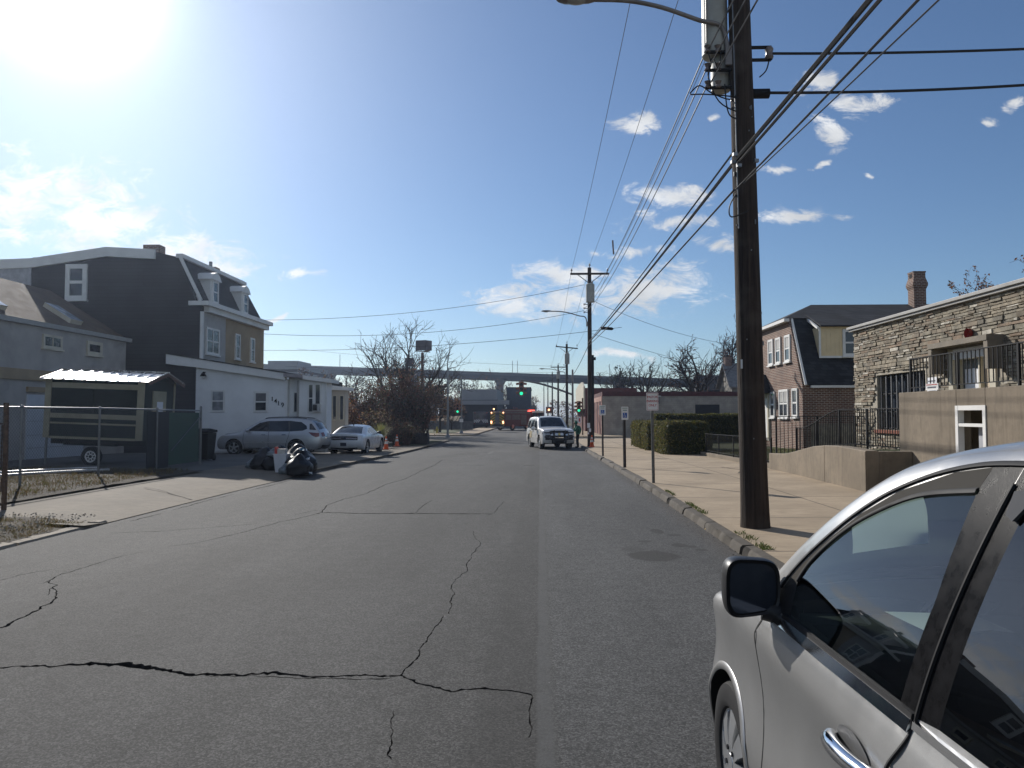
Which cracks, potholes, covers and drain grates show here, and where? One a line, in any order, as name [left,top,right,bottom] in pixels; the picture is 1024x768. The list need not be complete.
crack [0,531,533,759]
crack [124,460,503,546]
